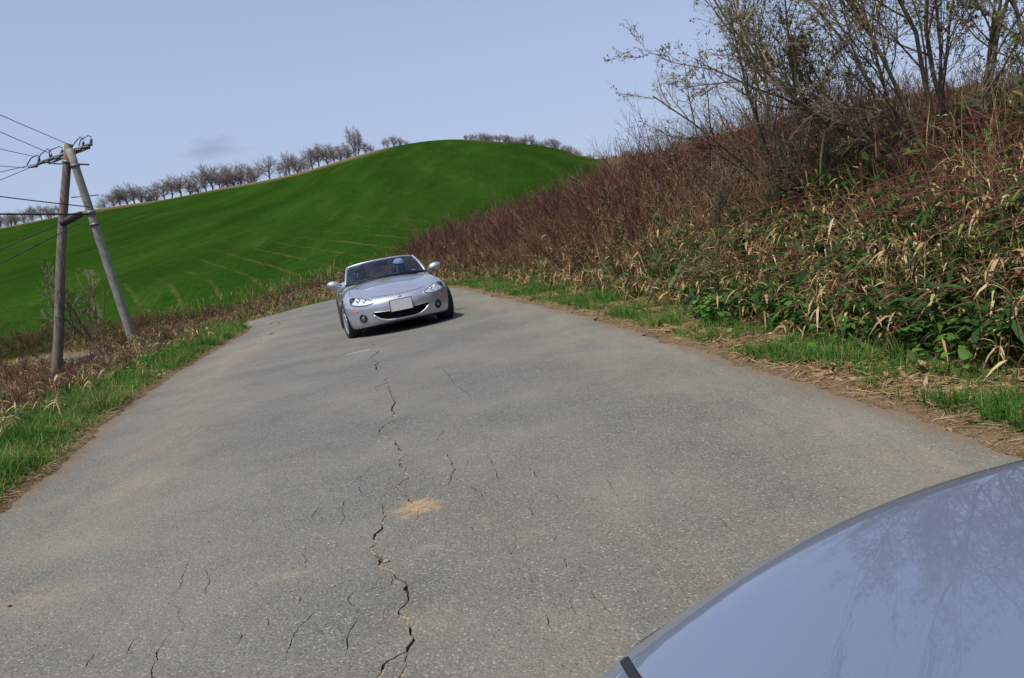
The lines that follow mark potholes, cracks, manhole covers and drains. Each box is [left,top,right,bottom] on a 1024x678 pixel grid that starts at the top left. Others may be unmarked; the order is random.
crack [331,344,419,678]
crack [126,564,188,678]
crack [437,430,499,506]
